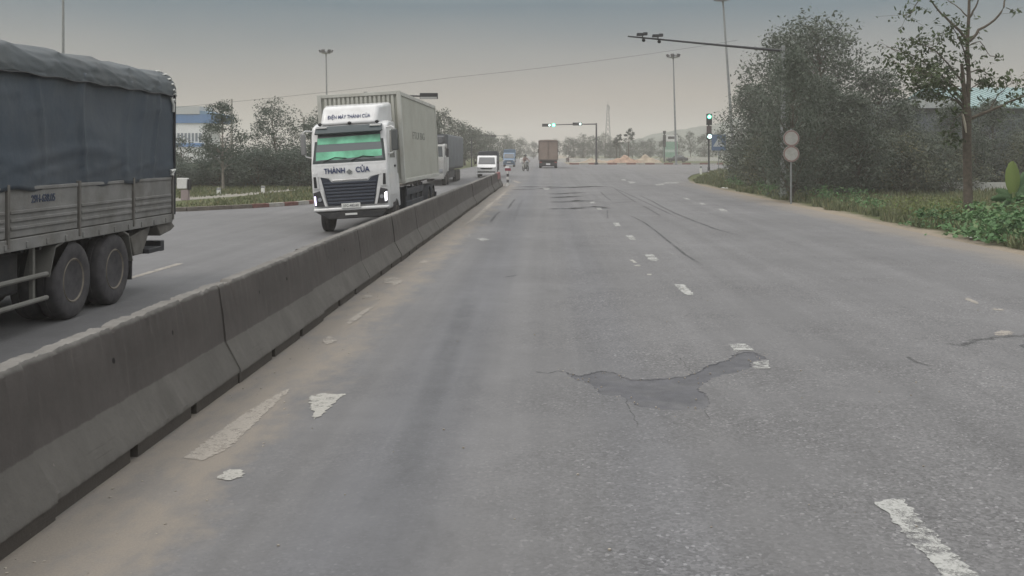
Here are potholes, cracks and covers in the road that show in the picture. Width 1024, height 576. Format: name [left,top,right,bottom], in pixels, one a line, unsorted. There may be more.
pothole [566,352,766,410]
